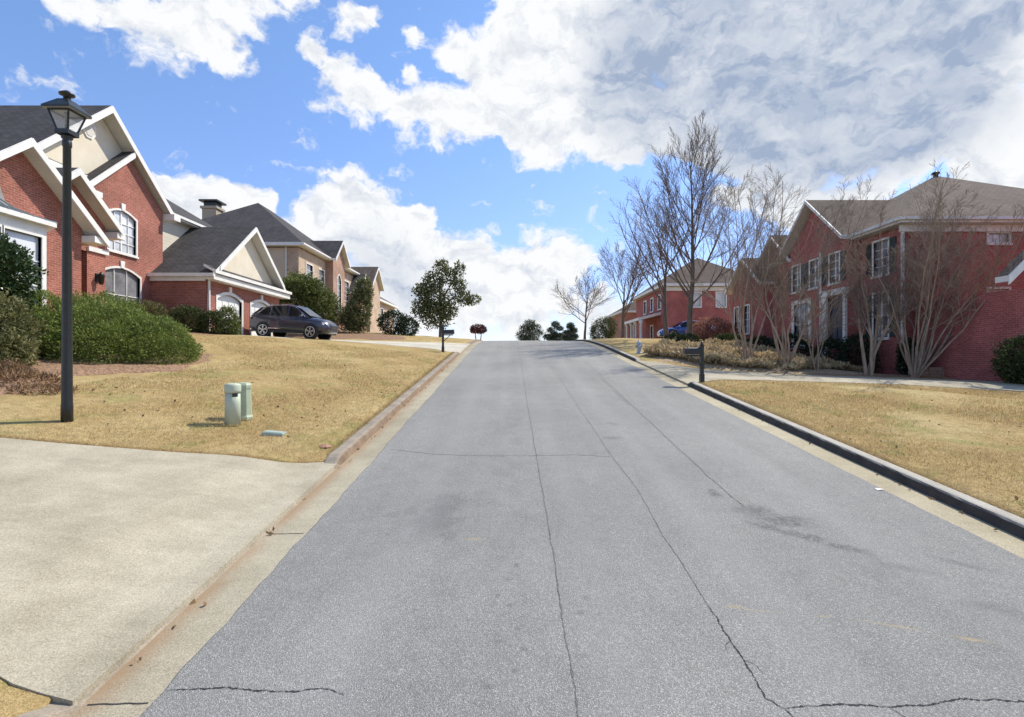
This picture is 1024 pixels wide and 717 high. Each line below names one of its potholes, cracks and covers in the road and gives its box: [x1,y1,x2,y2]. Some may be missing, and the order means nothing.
crack [550,365,1024,717]
crack [168,686,343,694]
